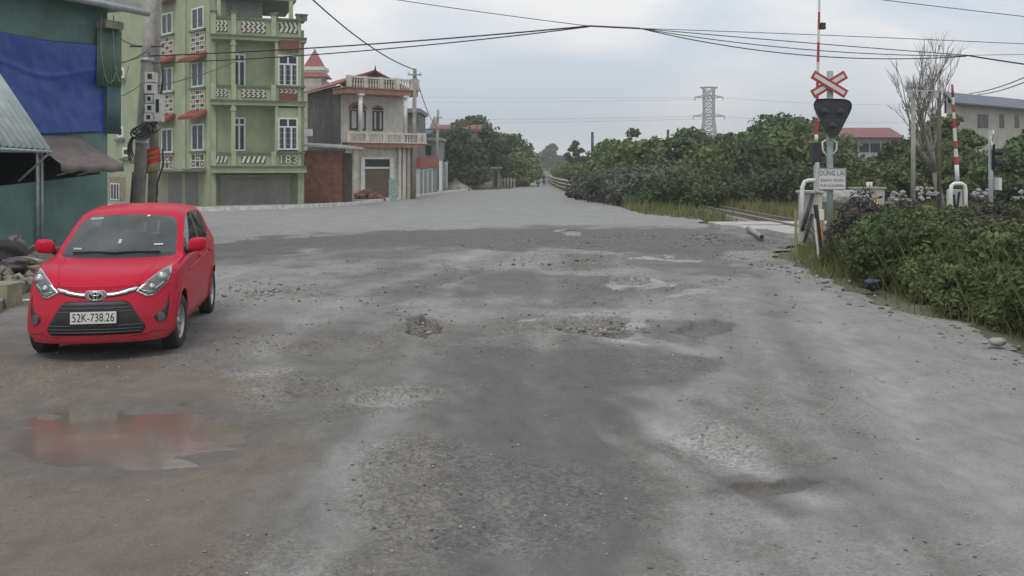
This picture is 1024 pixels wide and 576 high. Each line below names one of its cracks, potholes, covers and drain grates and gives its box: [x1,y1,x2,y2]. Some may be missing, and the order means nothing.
pothole [658,317,748,342]
pothole [521,313,647,343]
pothole [392,312,455,342]
pothole [0,390,314,495]
pothole [701,472,850,507]
